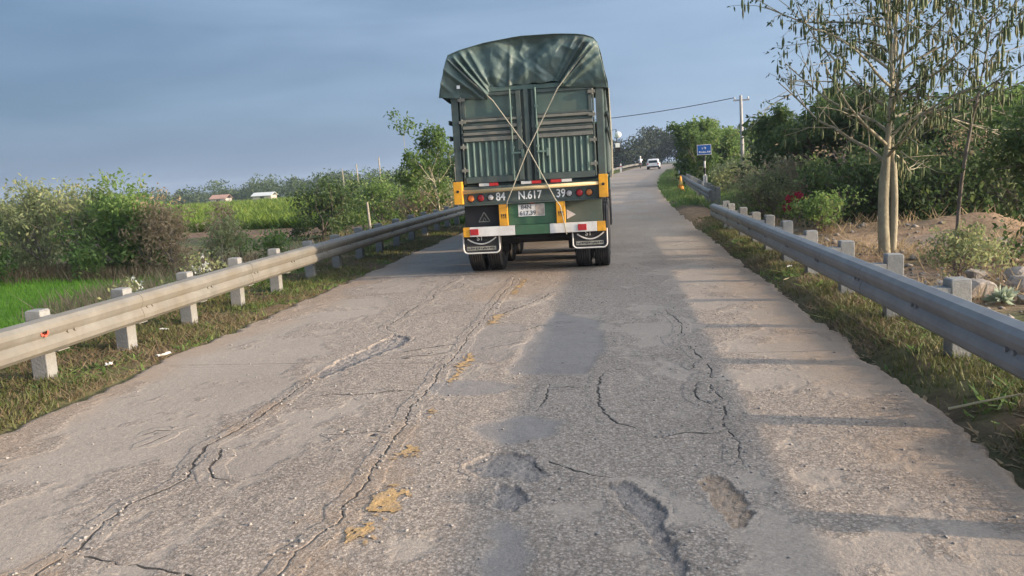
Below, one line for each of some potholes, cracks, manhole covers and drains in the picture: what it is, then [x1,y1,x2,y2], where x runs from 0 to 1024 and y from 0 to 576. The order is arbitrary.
pothole [687,471,764,533]
pothole [590,476,703,576]
pothole [456,448,557,486]
pothole [480,481,537,517]
crack [15,277,843,576]
